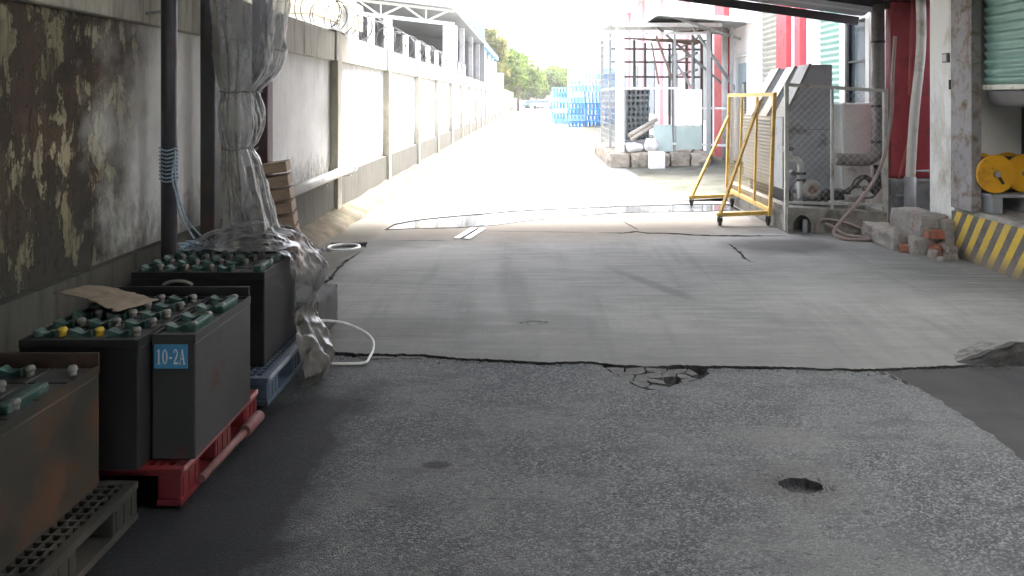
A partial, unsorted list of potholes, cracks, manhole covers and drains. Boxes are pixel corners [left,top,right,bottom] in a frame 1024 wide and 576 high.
crack [323,251,361,283]
pothole [765,472,835,498]
crack [334,352,1024,385]
crack [623,221,761,262]
